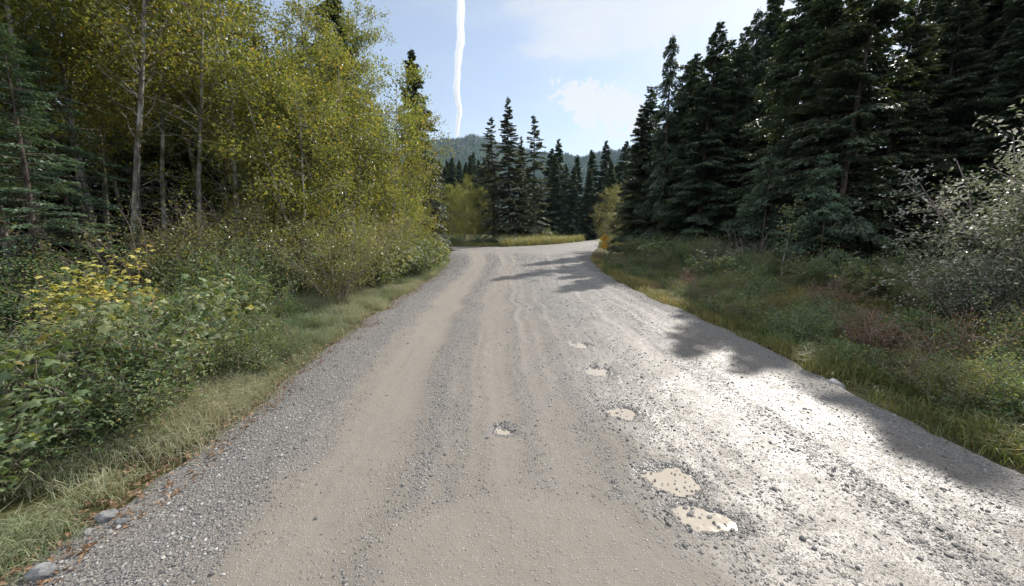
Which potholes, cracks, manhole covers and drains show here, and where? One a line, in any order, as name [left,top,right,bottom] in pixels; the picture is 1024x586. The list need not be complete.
pothole [665,500,746,535]
pothole [583,366,612,376]
pothole [635,463,708,499]
pothole [601,404,639,421]
pothole [494,425,514,436]
